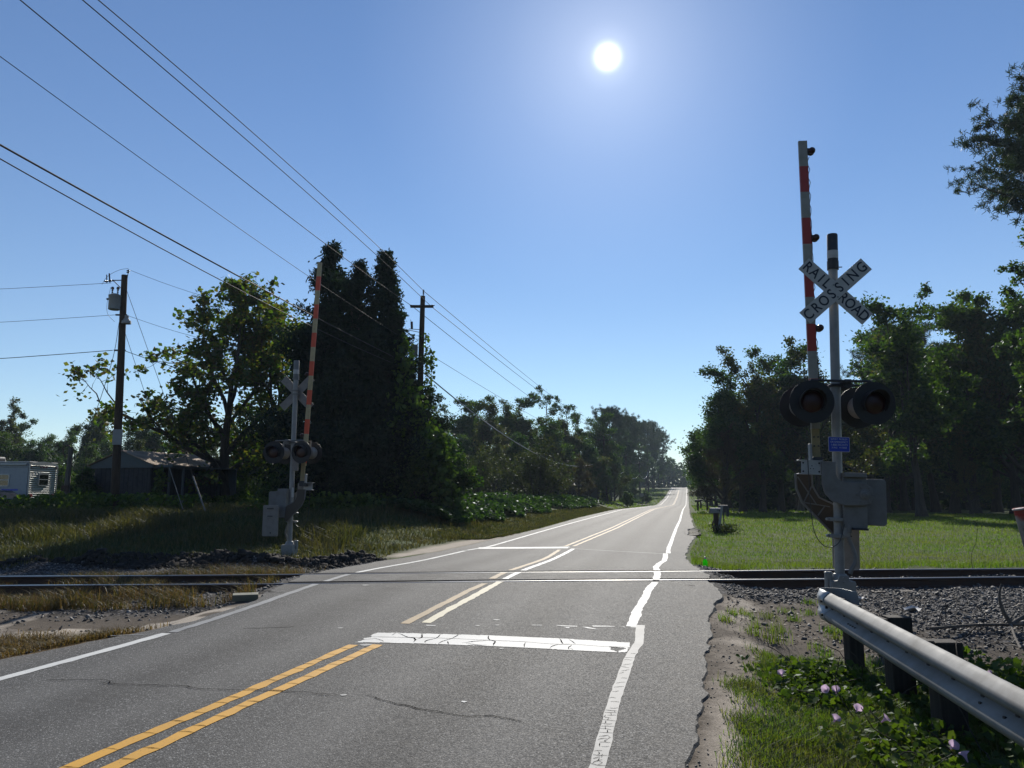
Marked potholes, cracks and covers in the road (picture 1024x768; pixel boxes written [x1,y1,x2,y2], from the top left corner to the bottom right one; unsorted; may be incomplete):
crack [47,633,635,768]
